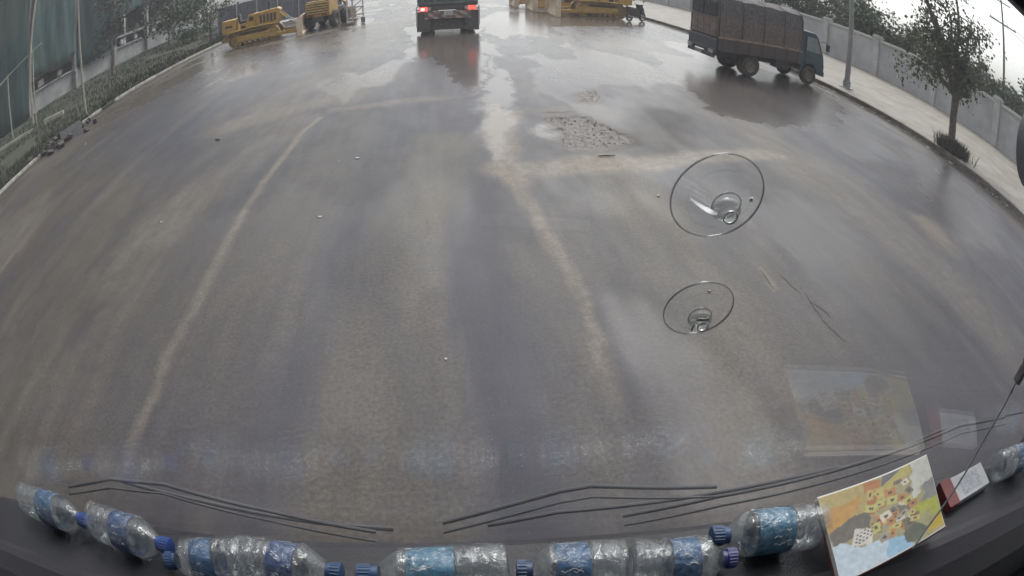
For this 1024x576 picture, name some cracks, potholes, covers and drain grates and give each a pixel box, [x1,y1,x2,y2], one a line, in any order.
pothole [566,90,605,104]
pothole [536,114,642,154]
crack [760,269,846,342]
